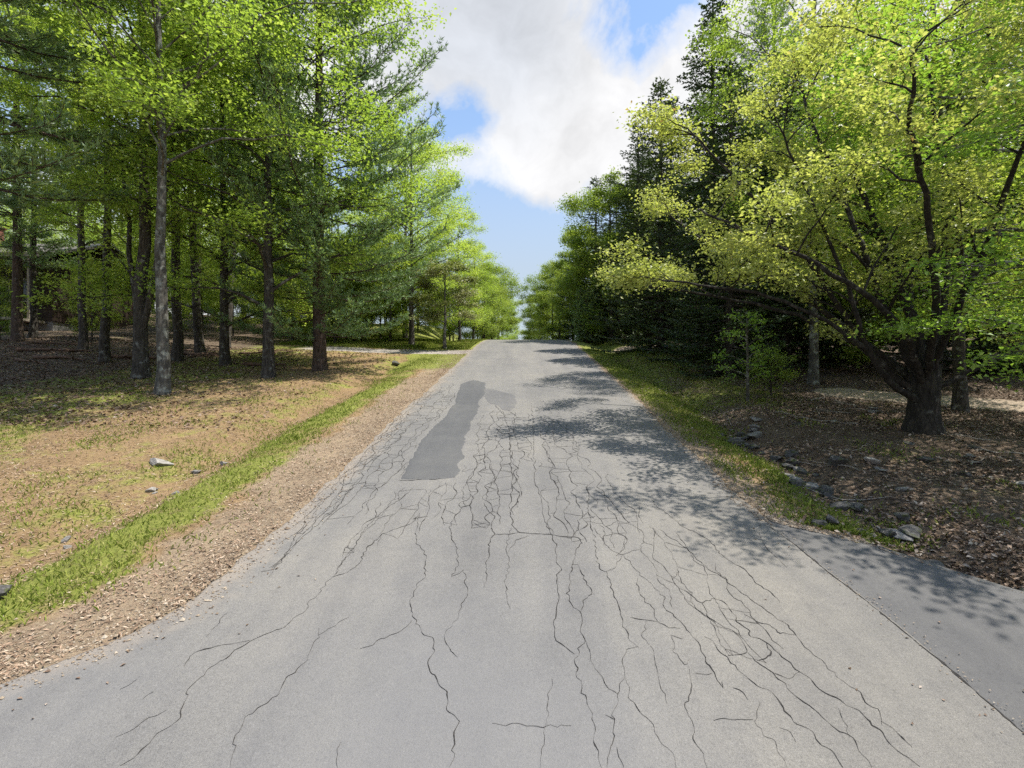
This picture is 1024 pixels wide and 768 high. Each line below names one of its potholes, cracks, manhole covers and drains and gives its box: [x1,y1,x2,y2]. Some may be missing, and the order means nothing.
crack [119,386,460,767]
crack [429,405,920,768]
